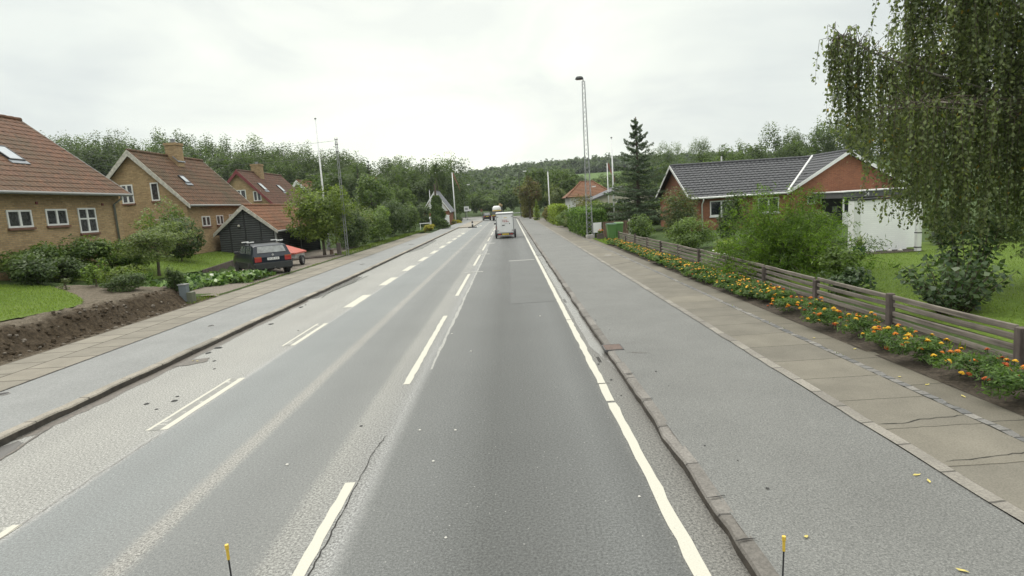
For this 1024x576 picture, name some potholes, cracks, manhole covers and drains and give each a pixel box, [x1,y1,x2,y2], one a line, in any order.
crack [307,435,387,576]
manhole cover [602,344,624,353]
